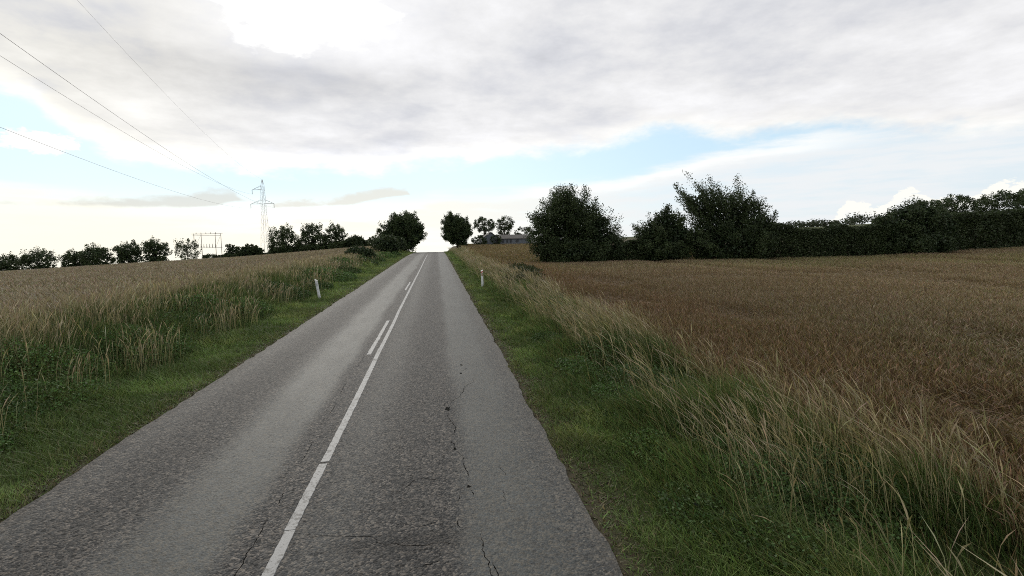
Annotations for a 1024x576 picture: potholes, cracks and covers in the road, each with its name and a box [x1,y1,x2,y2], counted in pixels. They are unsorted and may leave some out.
crack [296,385,474,566]
crack [480,532,499,576]
